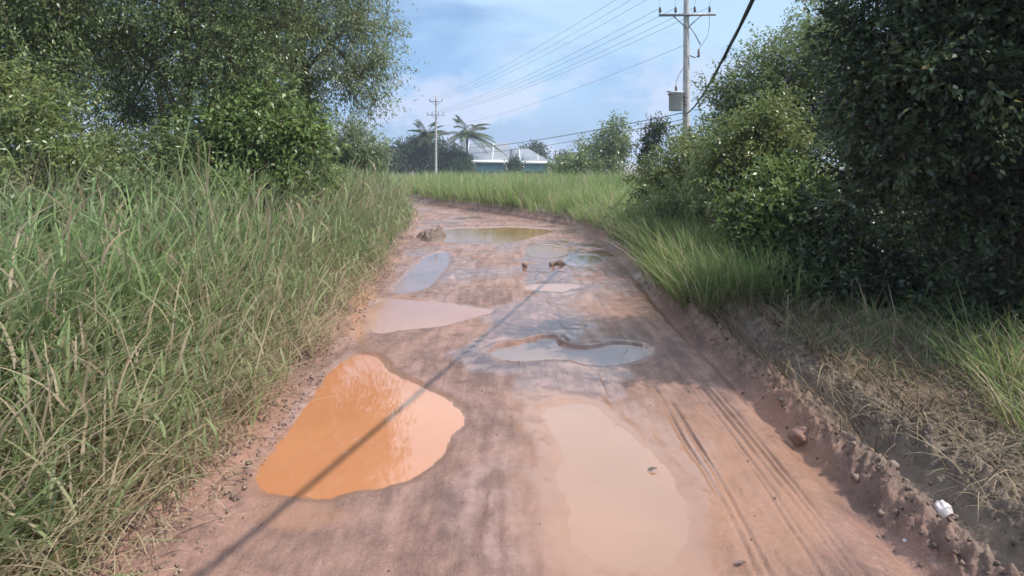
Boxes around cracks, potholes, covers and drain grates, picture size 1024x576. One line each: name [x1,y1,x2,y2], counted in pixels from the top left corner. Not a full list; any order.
pothole [483,333,654,367]
pothole [531,398,697,576]
pothole [388,251,453,294]
pothole [239,350,476,503]
pothole [359,297,496,334]
pothole [439,226,556,243]
pothole [561,254,606,267]
pothole [519,283,587,292]
pothole [521,244,570,259]
